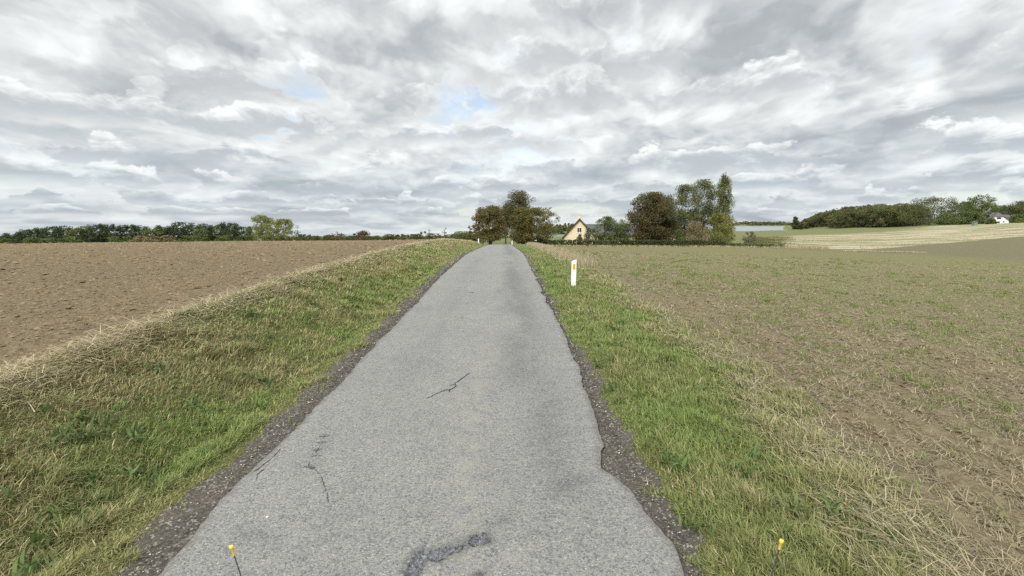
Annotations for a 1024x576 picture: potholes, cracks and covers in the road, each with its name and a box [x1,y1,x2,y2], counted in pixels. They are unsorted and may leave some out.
crack [304,434,329,503]
